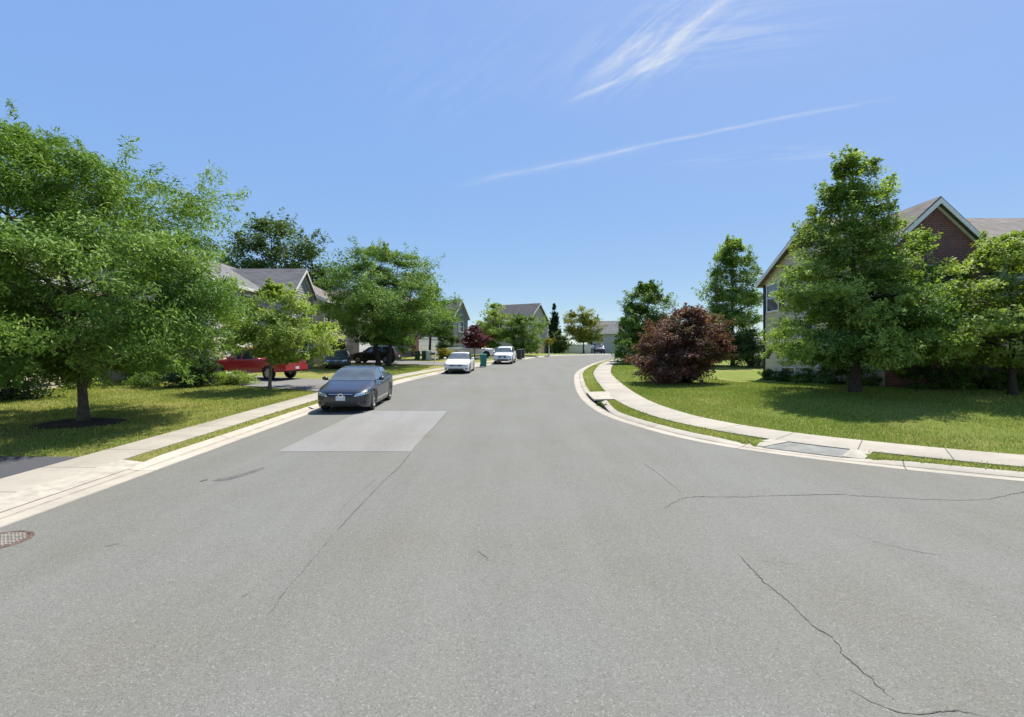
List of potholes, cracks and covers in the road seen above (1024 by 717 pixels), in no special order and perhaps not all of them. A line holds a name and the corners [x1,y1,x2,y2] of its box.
crack [737,554,990,717]
crack [646,465,1024,507]
crack [269,454,410,614]
